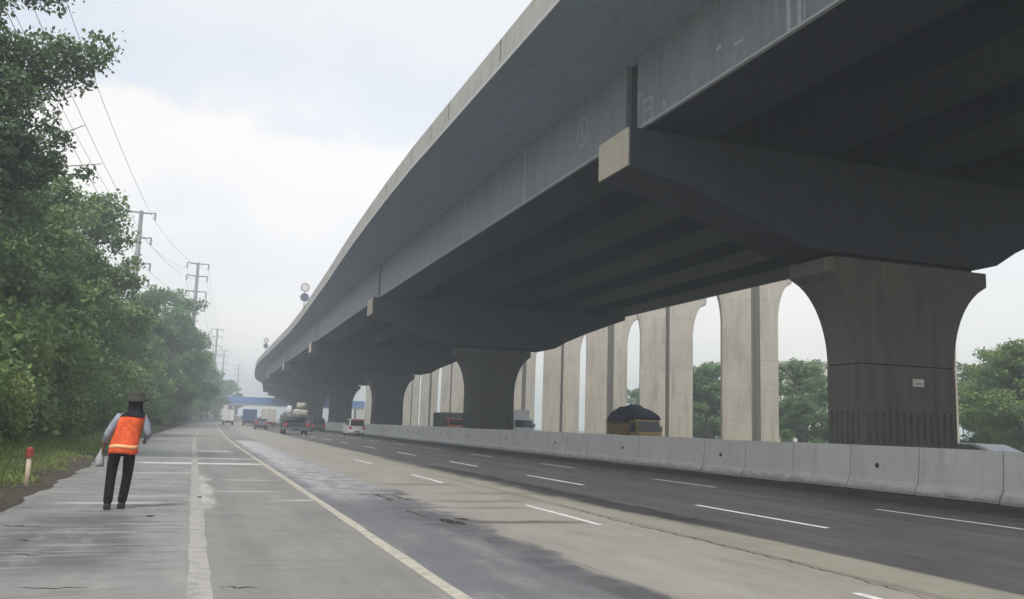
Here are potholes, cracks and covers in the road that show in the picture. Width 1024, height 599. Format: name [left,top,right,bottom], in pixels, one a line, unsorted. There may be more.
crack [370,493,428,518]
